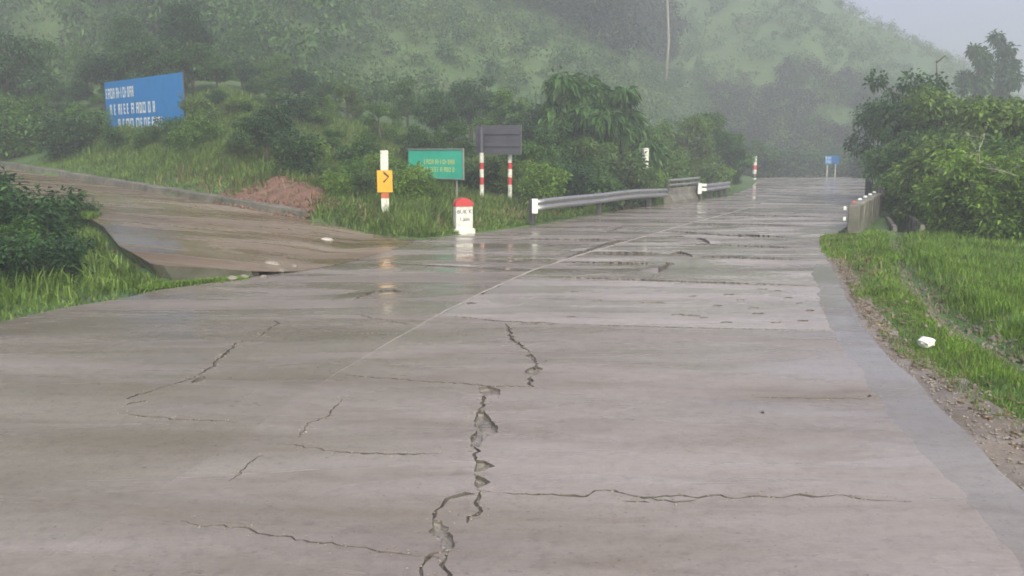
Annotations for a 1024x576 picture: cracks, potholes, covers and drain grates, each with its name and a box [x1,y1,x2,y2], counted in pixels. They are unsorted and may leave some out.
crack [127,320,280,422]
crack [286,400,442,455]
crack [432,489,912,523]
crack [186,521,453,576]
crack [334,315,557,412]
